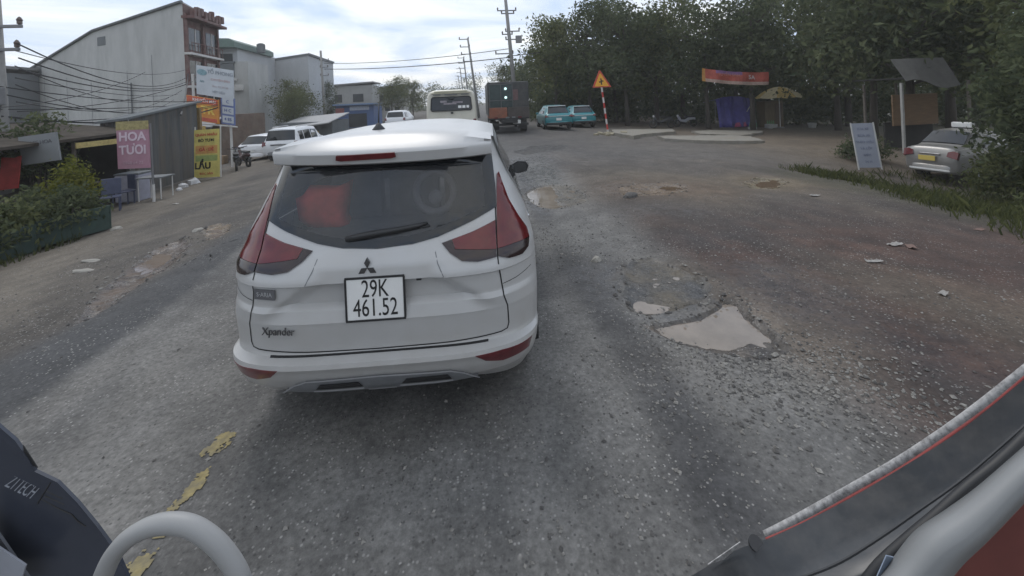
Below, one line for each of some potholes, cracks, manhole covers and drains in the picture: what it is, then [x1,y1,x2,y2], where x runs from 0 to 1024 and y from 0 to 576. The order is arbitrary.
pothole [741,177,790,189]
pothole [640,296,791,361]
pothole [621,258,713,316]
pothole [617,183,688,196]
pothole [525,184,588,210]
